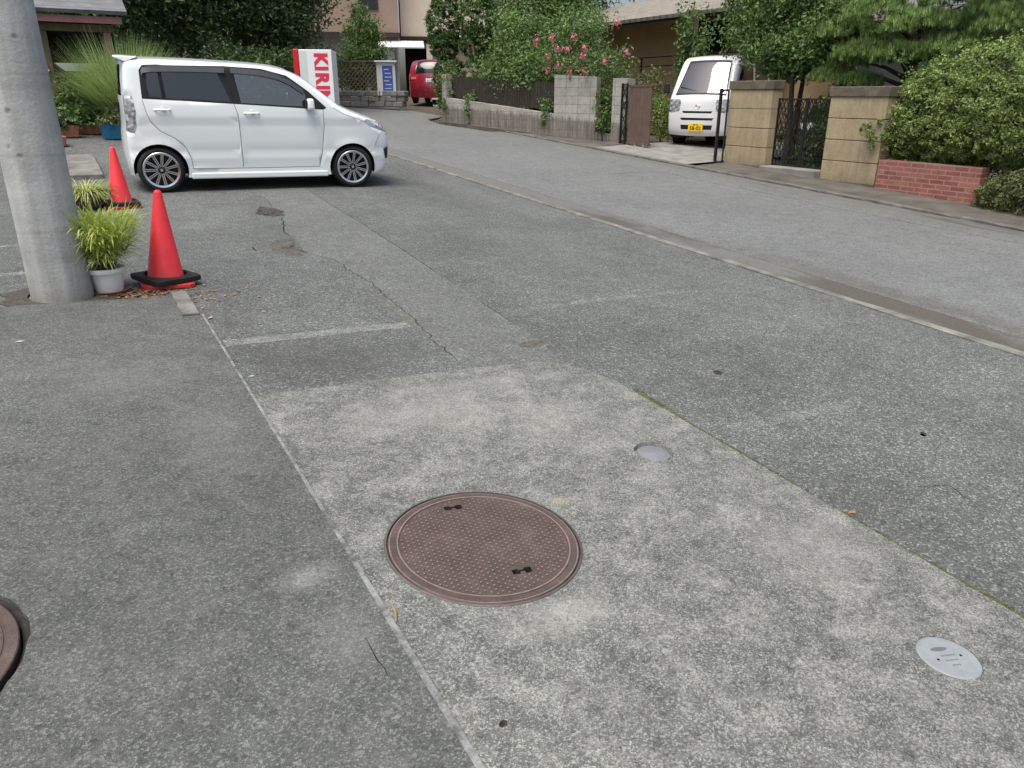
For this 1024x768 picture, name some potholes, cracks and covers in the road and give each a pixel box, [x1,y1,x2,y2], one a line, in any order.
crack [264,197,464,366]
crack [313,193,515,324]
manhole cover [384,492,583,607]
utility cover [634,443,674,461]
manhole cover [0,599,31,693]
